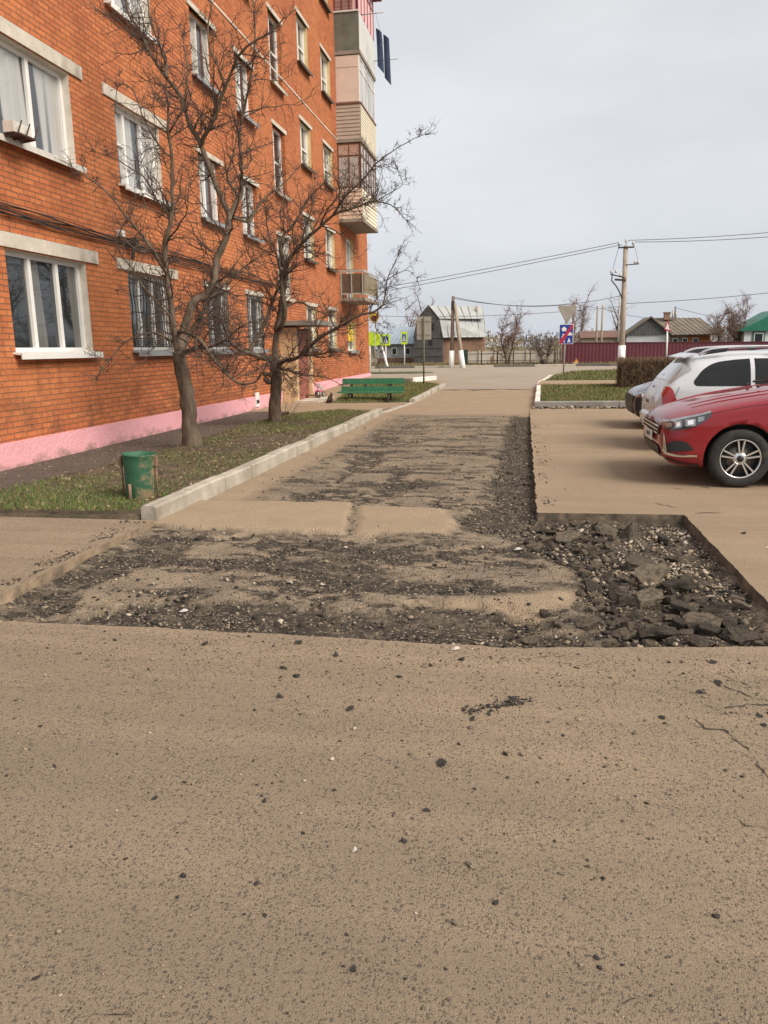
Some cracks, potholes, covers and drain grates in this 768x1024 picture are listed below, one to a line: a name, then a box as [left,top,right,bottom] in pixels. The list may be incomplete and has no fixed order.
pothole [512,521,768,648]
pothole [201,534,540,575]
pothole [69,599,579,648]
crack [691,675,768,777]
pothole [422,446,500,456]
pothole [333,454,383,482]
pothole [0,533,207,624]
pothole [366,432,418,446]
pothole [427,497,465,511]
pothole [287,472,416,504]
pothole [244,575,497,597]
